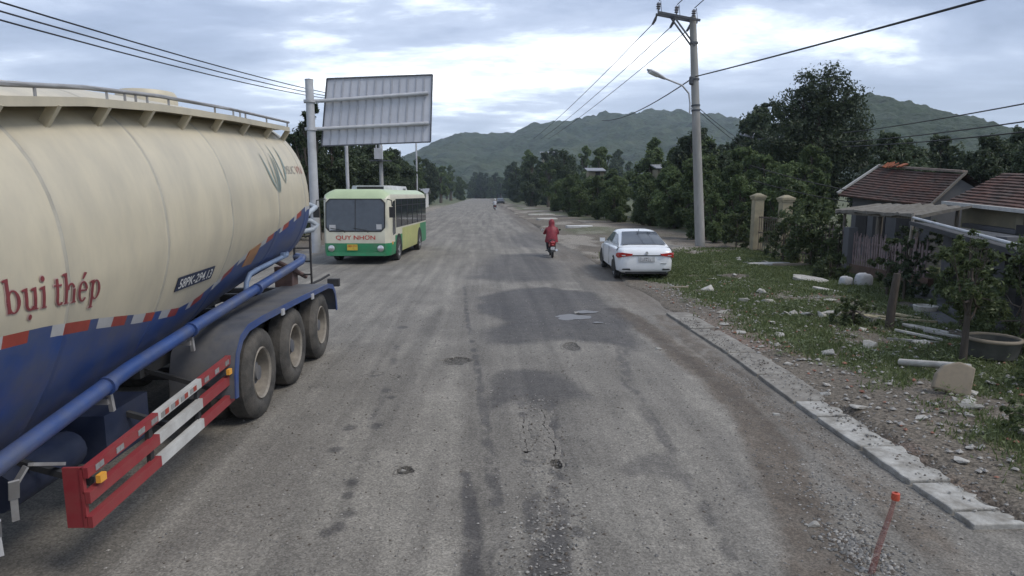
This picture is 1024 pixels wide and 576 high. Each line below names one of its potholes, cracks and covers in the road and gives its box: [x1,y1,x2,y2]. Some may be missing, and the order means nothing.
pothole [438,356,476,366]
pothole [393,465,416,476]
pothole [560,341,582,353]
pothole [548,458,565,471]
crack [517,409,562,461]
